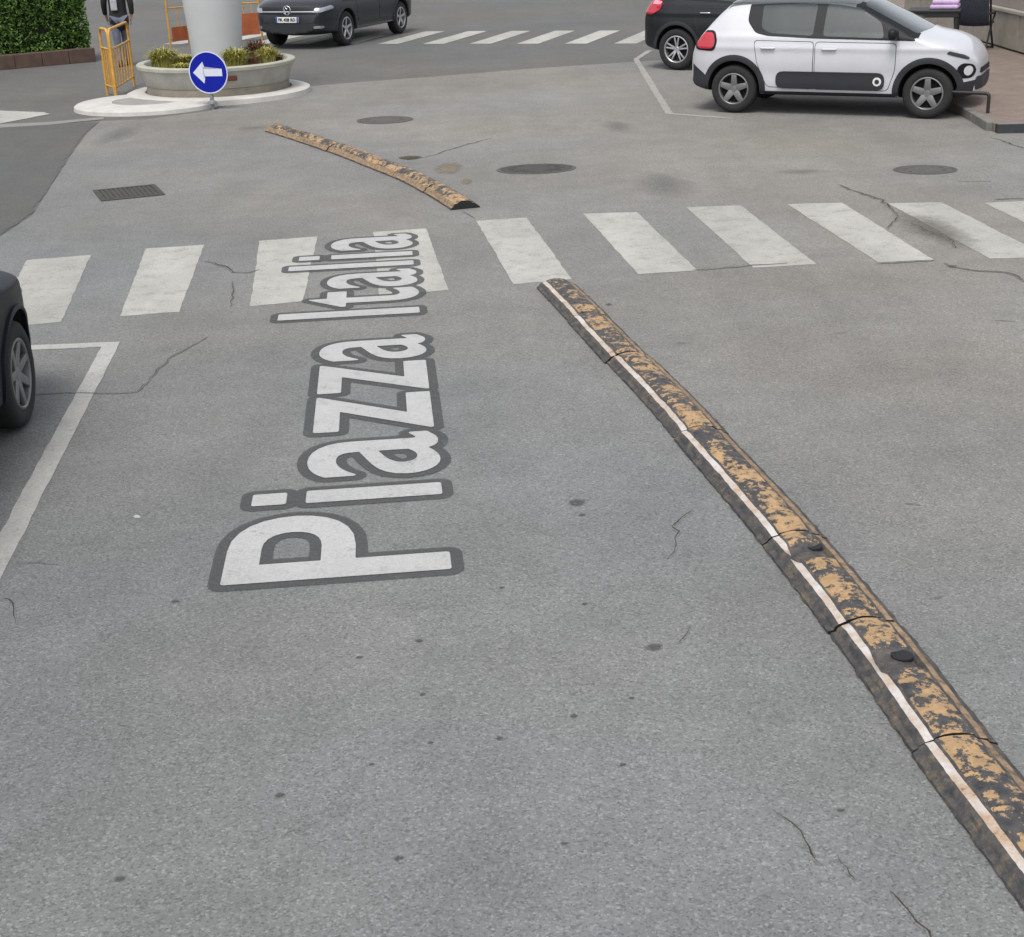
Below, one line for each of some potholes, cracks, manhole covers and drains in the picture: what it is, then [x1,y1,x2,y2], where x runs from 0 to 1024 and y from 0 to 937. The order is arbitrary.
crack [771,809,856,880]
crack [204,261,260,307]
crack [42,337,207,394]
drain grate [93,184,165,202]
manhole cover [357,116,413,124]
crack [889,890,934,937]
crack [2,597,17,622]
manhole cover [893,165,958,174]
crack [422,138,490,158]
crack [839,184,1024,281]
manhole cover [497,163,576,174]
crack [666,510,693,559]
